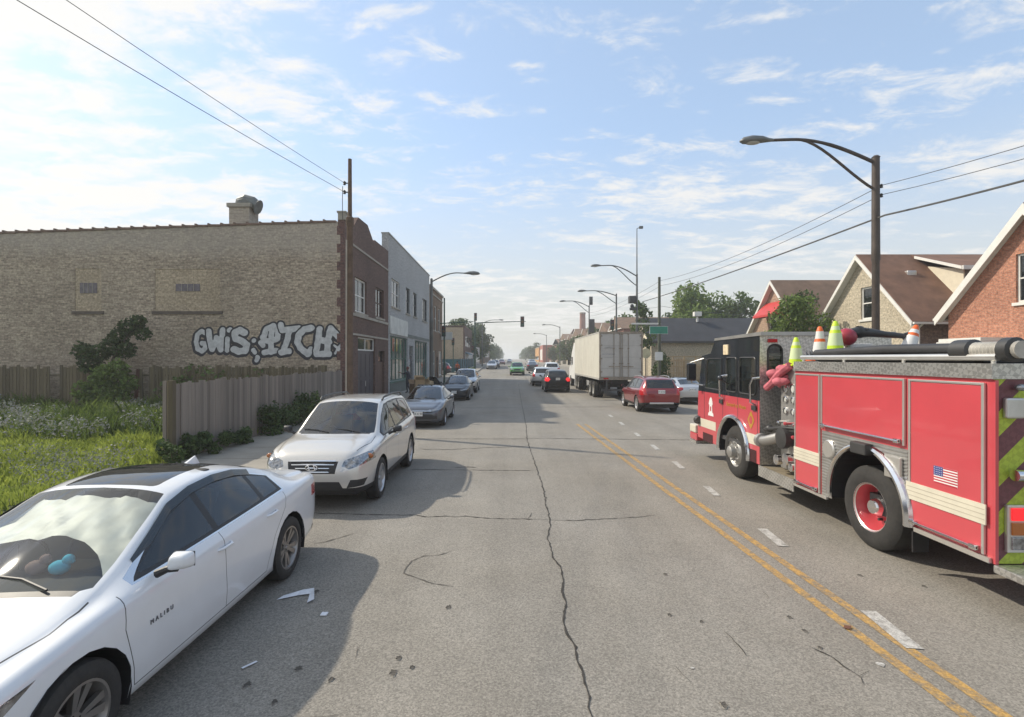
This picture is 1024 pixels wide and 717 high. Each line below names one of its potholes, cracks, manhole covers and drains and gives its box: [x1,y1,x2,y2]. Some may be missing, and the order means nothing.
crack [320,389,617,717]
